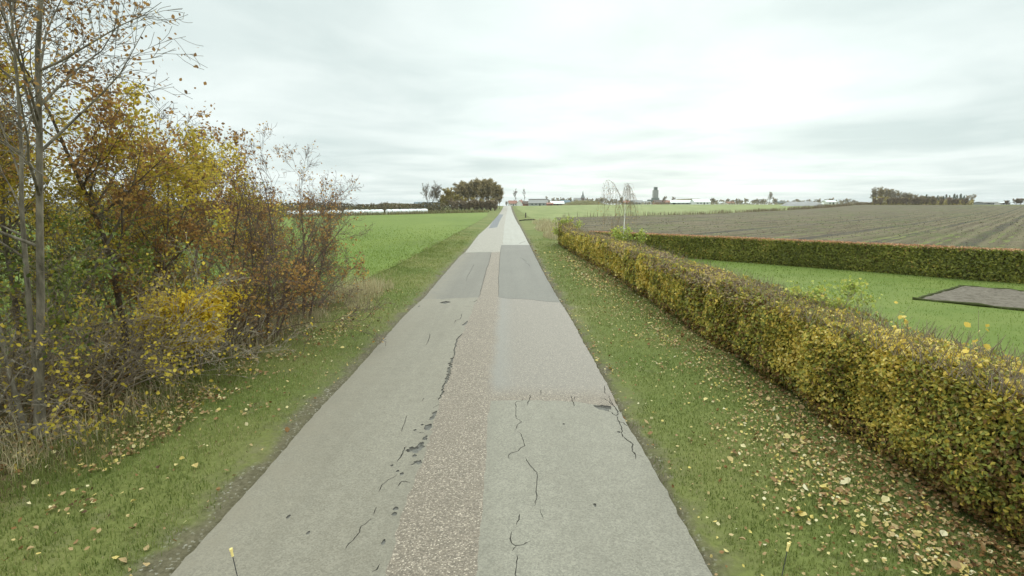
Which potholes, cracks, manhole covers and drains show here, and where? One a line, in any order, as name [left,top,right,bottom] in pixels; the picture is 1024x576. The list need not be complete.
crack [379,416,423,491]
pothole [406,442,425,453]
crack [603,386,641,459]
crack [508,395,543,576]
